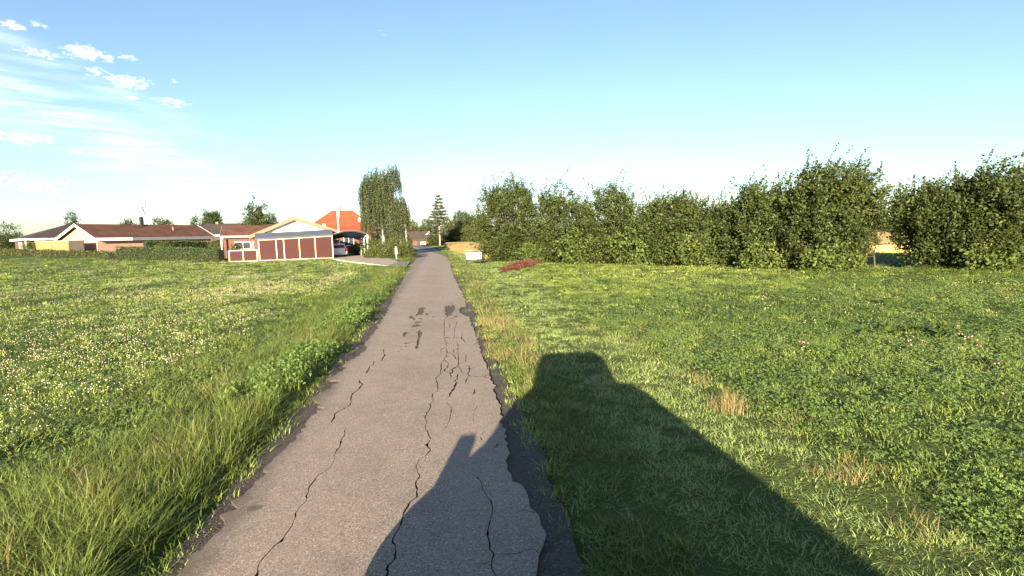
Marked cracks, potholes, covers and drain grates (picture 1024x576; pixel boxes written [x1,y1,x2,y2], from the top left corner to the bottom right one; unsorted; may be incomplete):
crack [386,319,502,576]
crack [475,475,535,576]
crack [255,349,386,576]
